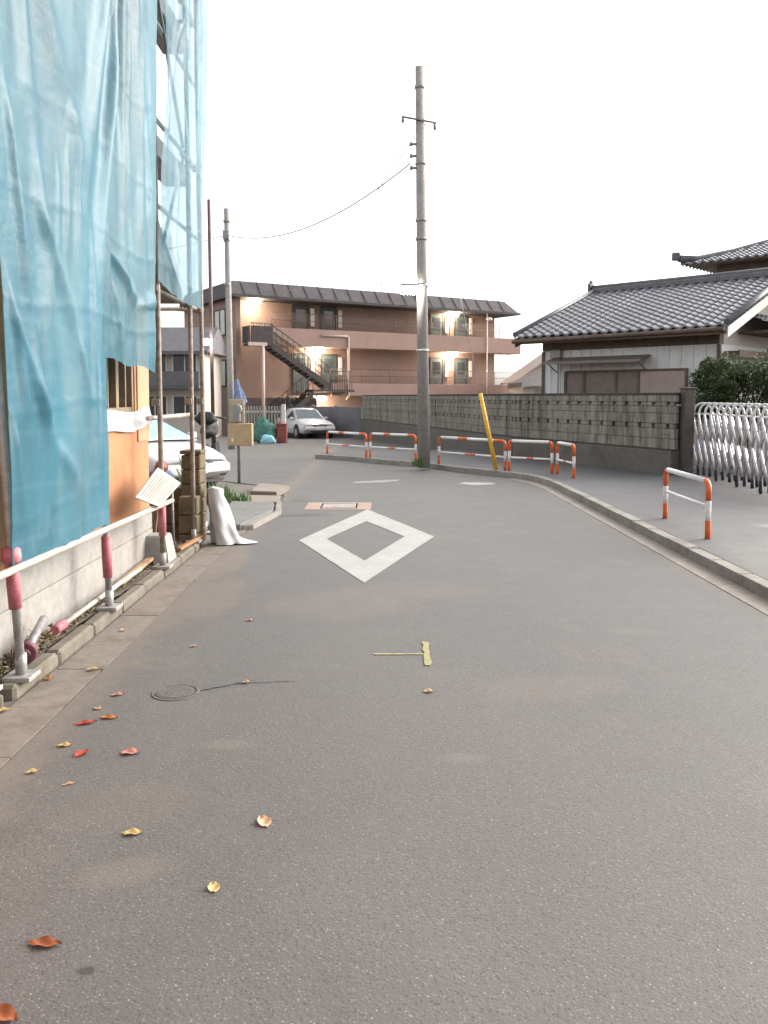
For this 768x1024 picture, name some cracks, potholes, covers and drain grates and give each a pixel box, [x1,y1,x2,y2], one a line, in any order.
manhole cover [304,502,371,510]
manhole cover [151,684,200,701]
